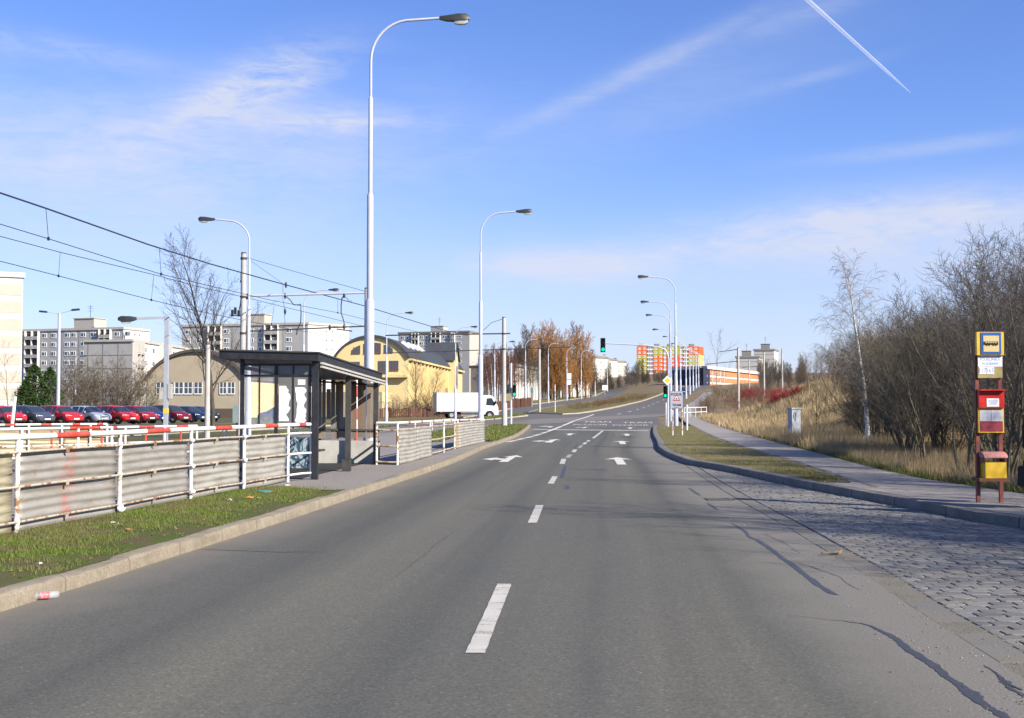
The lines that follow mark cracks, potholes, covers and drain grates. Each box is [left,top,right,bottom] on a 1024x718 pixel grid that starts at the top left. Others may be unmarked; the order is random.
crack [984,665,1024,696]
